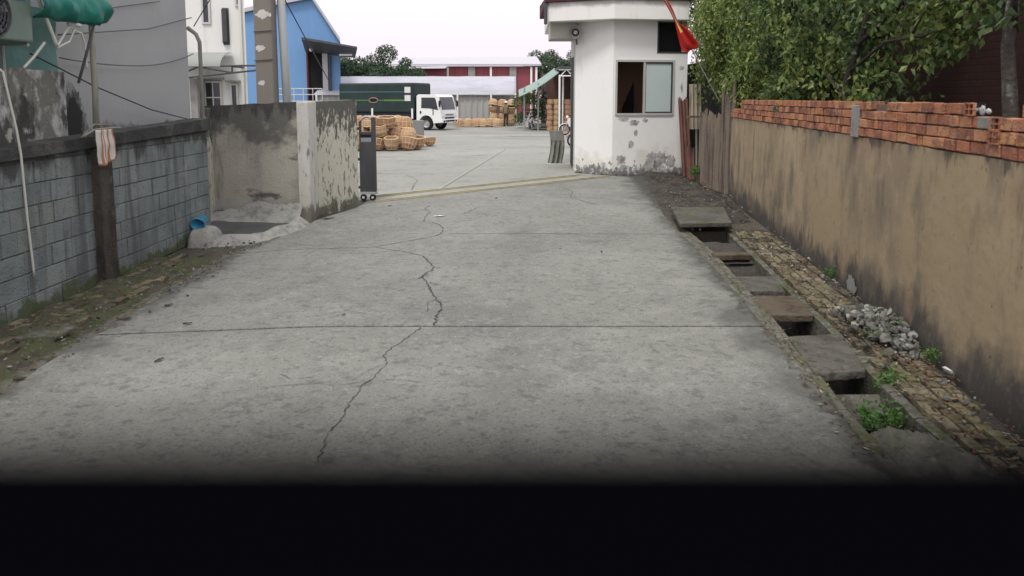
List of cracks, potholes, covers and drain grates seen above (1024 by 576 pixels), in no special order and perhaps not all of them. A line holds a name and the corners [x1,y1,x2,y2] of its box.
crack [237,174,444,429]
